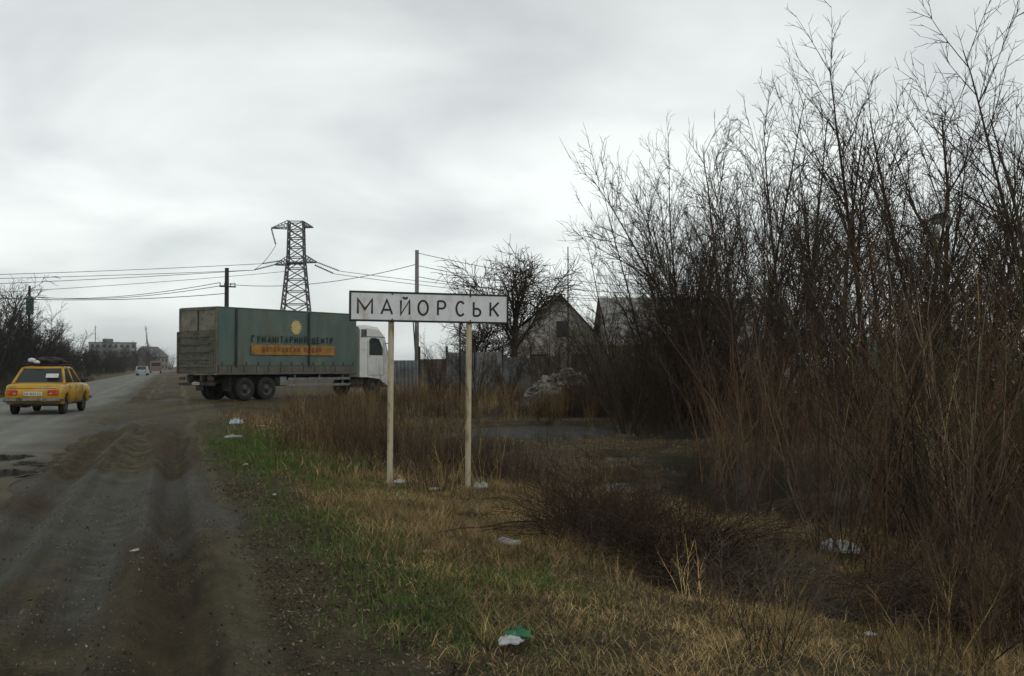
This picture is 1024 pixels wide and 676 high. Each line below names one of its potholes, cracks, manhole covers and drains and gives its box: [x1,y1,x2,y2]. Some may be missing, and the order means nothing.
pothole [0,468,42,478]
pothole [0,454,38,462]
